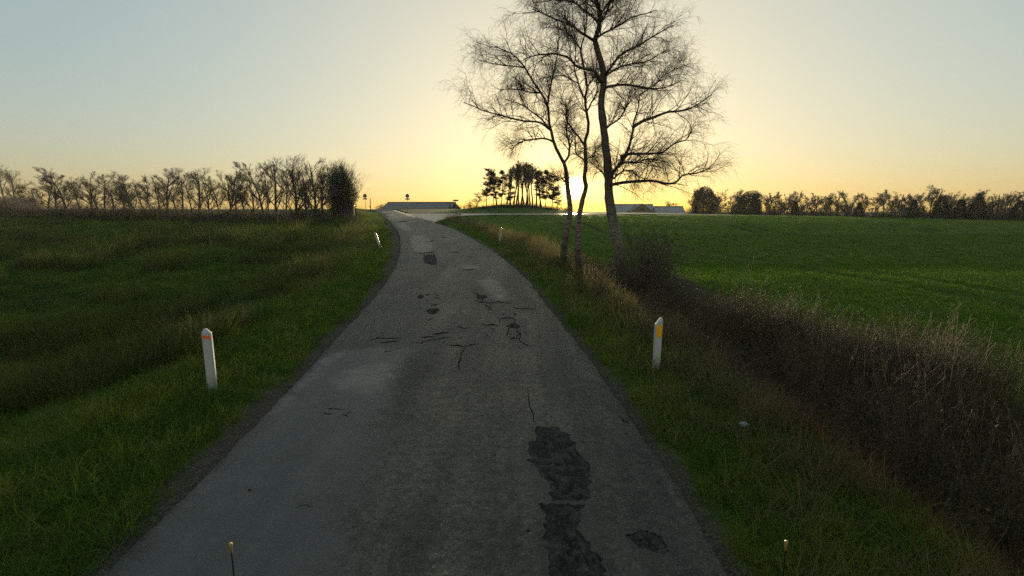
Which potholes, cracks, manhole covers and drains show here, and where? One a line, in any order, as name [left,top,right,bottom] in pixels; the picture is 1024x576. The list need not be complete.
crack [368,293,531,371]
